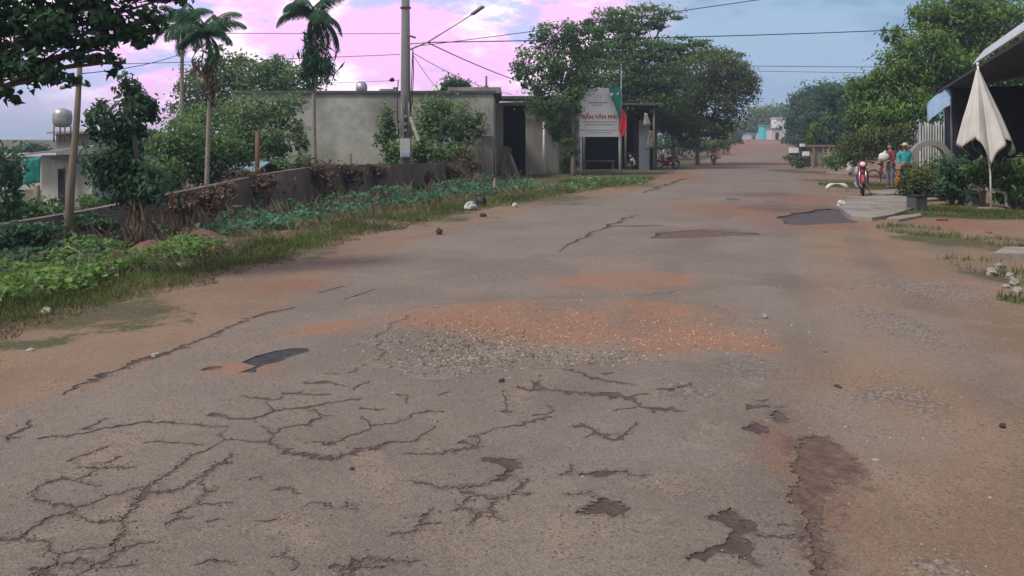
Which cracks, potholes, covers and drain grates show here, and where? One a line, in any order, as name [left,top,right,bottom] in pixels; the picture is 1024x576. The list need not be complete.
pothole [769,410,790,423]
pothole [742,421,770,435]
crack [319,286,374,299]
pothole [686,507,763,566]
pothole [576,497,630,517]
pothole [786,435,867,576]
crack [0,367,693,576]
